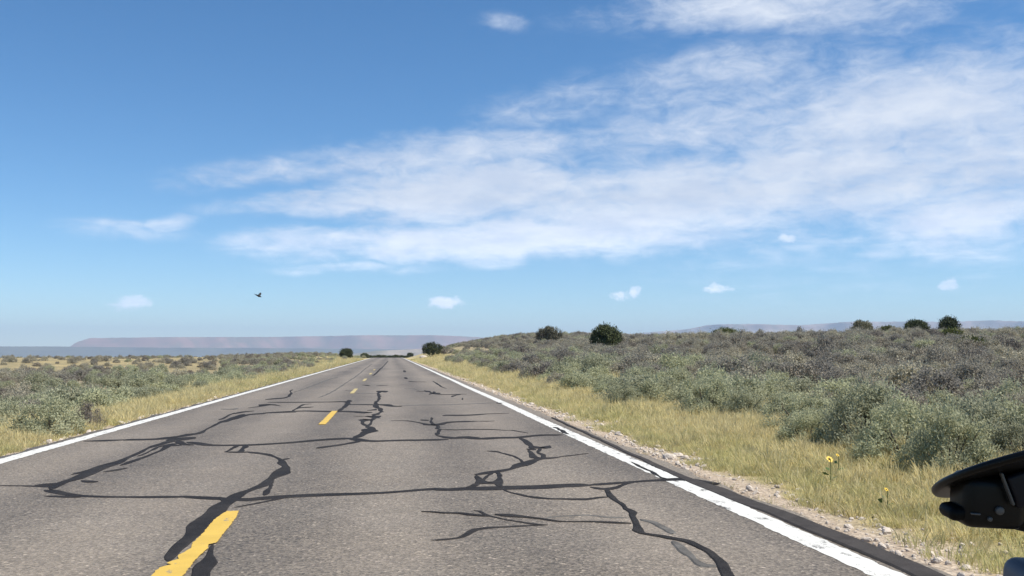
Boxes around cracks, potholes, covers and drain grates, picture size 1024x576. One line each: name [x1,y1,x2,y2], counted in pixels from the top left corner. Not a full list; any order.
crack [223,361,461,413]
